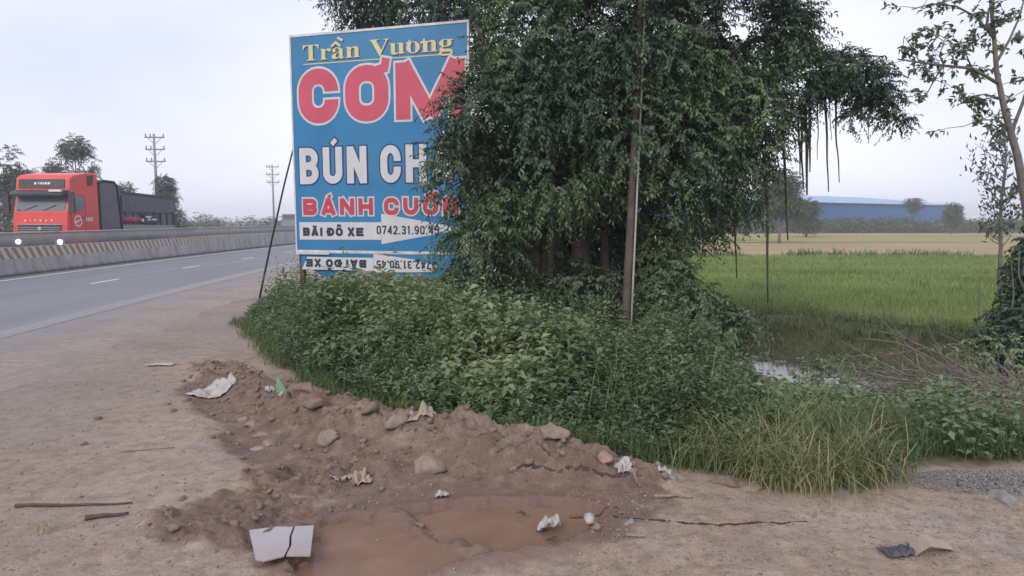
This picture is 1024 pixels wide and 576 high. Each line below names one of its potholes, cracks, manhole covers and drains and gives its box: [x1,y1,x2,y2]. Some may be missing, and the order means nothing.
pothole [283,494,612,576]
crack [612,515,807,527]
